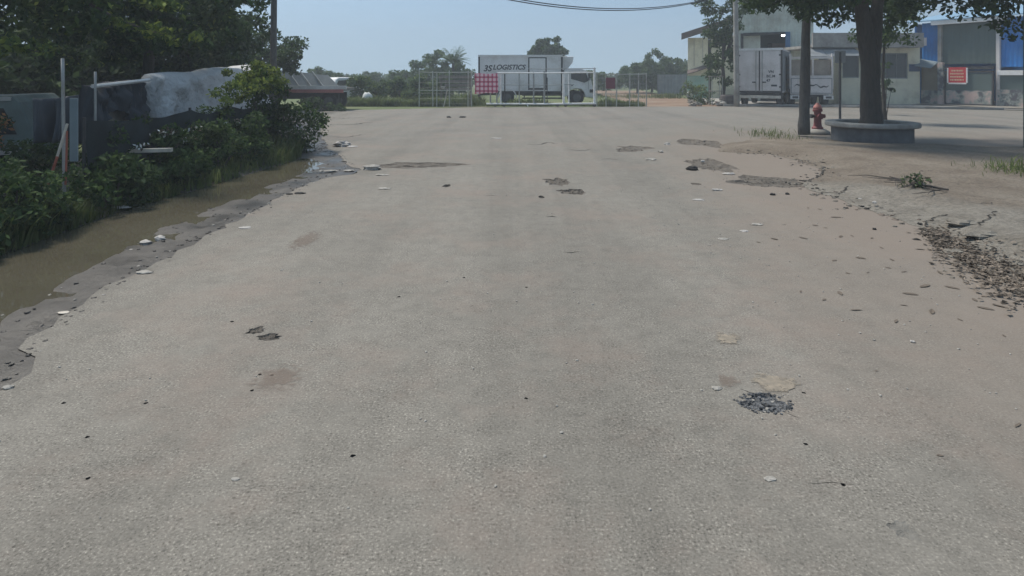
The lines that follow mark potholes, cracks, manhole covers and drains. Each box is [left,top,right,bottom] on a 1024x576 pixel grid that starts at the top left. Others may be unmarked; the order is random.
pothole [723,175,803,188]
pothole [676,139,721,148]
pothole [257,333,281,341]
pothole [683,158,740,173]
pothole [733,392,794,415]
pothole [542,177,571,186]
